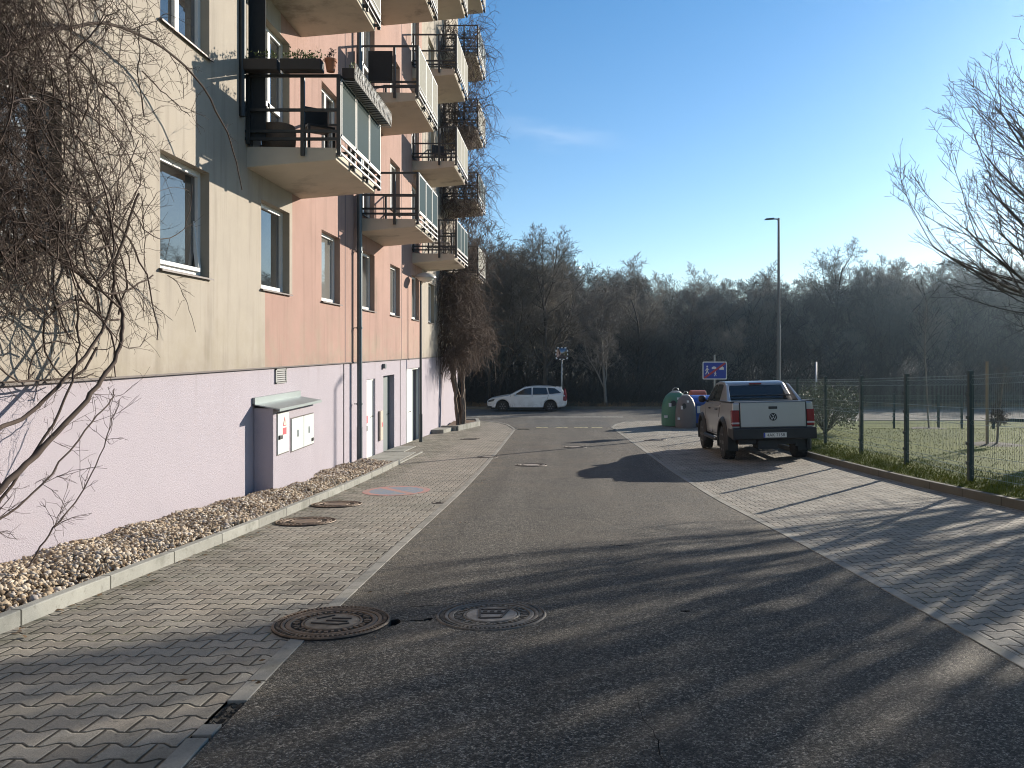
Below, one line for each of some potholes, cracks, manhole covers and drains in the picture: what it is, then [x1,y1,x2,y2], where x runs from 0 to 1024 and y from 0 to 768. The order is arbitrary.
manhole cover [271,606,391,641]
manhole cover [275,516,336,527]
manhole cover [436,600,546,631]
